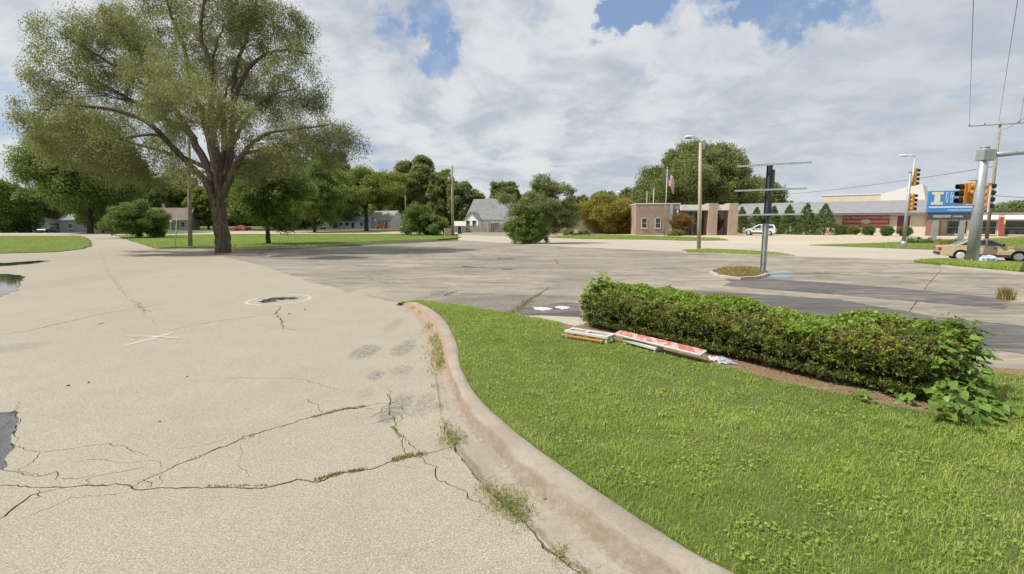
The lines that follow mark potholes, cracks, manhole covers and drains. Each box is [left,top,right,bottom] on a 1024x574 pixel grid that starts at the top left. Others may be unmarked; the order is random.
crack [504,287,549,314]
pothole [0,411,19,470]
crack [0,377,496,519]
